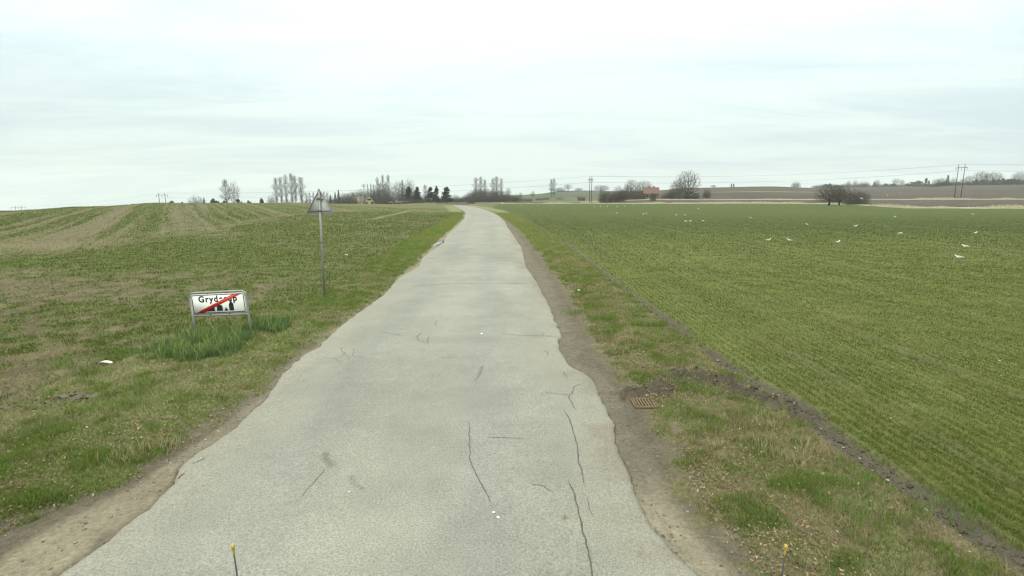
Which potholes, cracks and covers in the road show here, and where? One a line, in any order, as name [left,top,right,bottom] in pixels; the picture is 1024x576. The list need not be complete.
drain grate [630,398,659,409]
crack [468,421,491,502]
crack [535,371,593,576]
